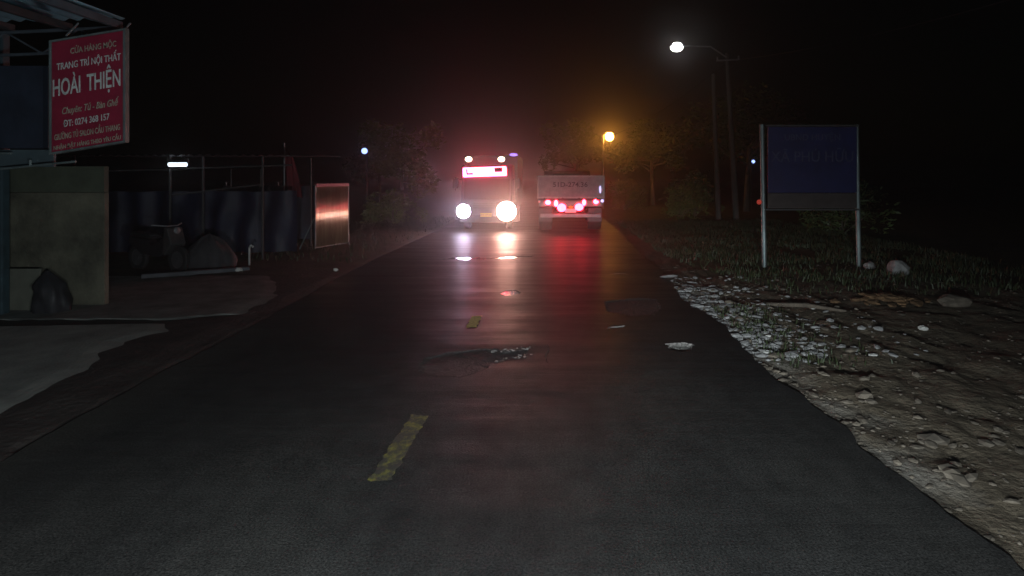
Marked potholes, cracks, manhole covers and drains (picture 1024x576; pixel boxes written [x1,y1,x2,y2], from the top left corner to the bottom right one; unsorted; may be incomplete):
pothole [417,347,532,378]
